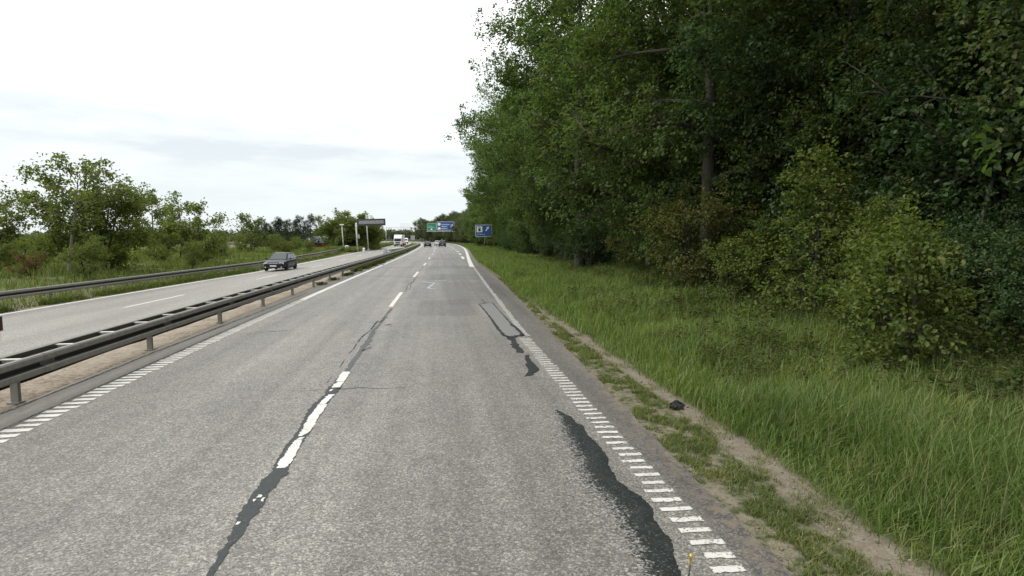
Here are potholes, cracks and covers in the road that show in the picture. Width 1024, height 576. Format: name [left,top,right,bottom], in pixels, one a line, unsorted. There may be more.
crack [253,317,403,391]
